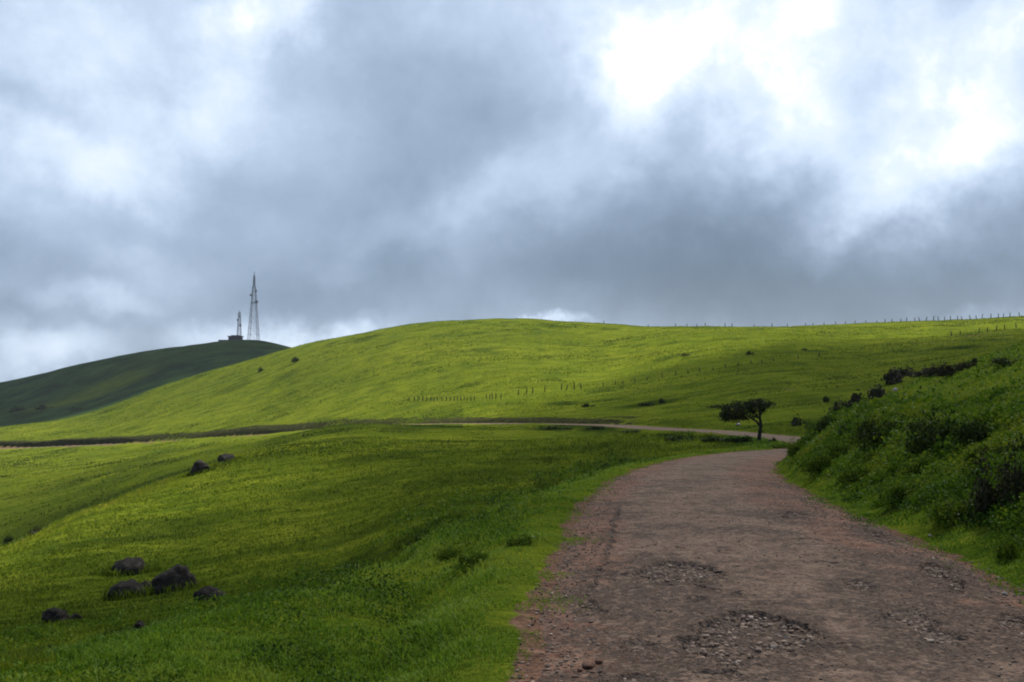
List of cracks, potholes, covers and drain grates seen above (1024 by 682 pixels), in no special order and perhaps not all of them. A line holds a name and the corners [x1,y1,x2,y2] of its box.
pothole [871,603,985,657]
pothole [624,560,736,586]
pothole [911,559,981,599]
crack [577,505,755,617]
pothole [841,576,887,593]
pothole [666,605,827,672]
